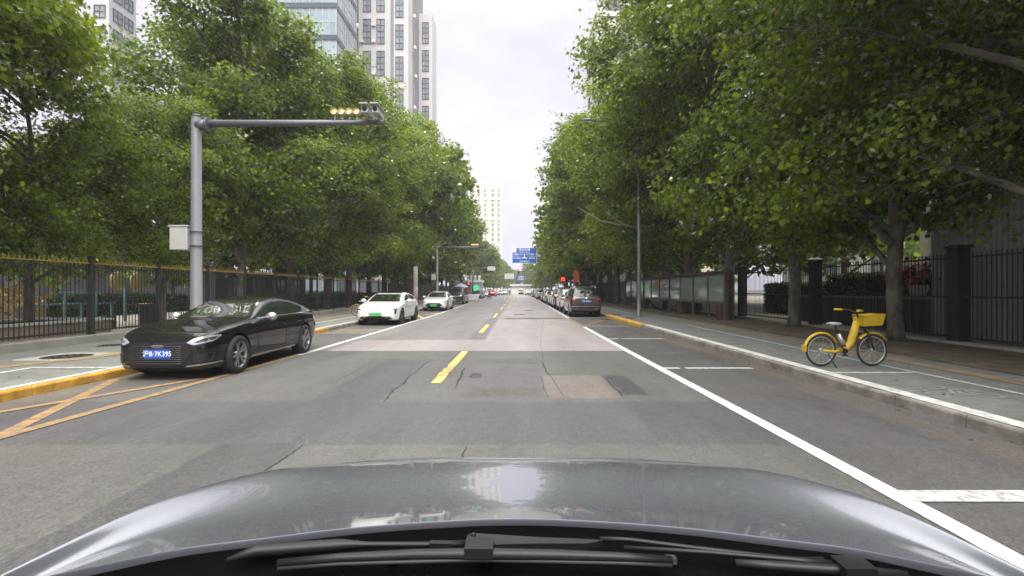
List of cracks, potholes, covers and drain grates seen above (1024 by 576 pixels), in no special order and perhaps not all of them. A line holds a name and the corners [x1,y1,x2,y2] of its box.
crack [264,445,303,471]
crack [383,360,431,402]
manhole cover [13,353,108,361]
